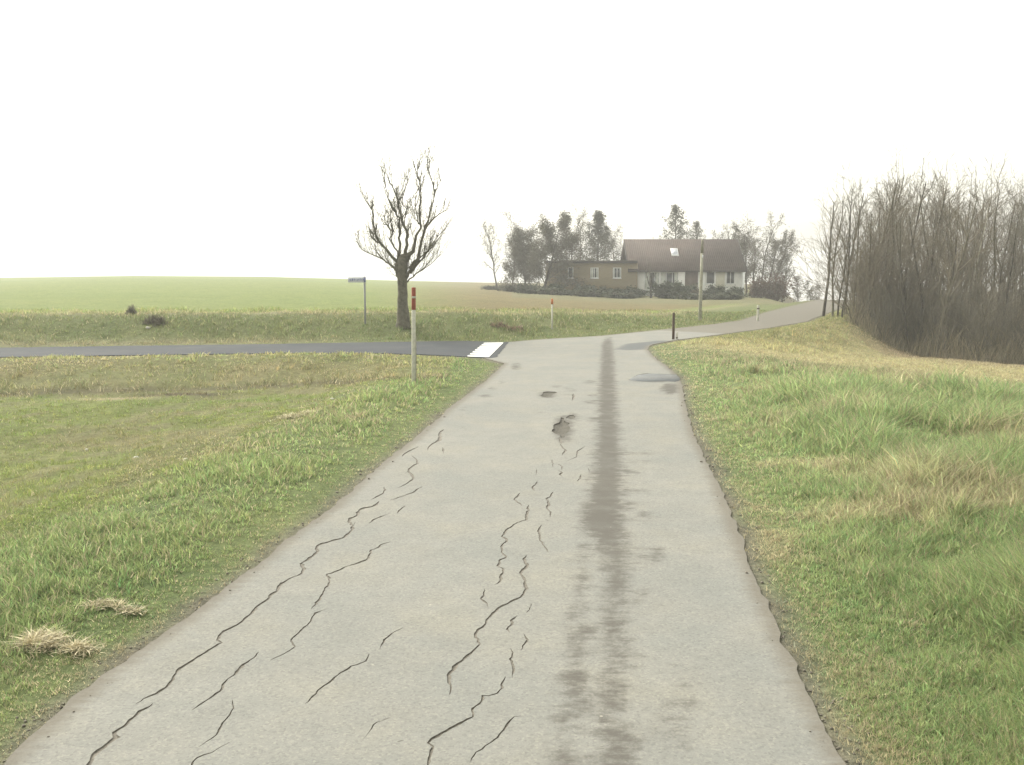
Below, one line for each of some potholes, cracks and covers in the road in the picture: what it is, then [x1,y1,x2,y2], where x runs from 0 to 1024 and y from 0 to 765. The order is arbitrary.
crack [427,438,590,765]
pothole [552,418,570,438]
crack [86,429,444,765]
